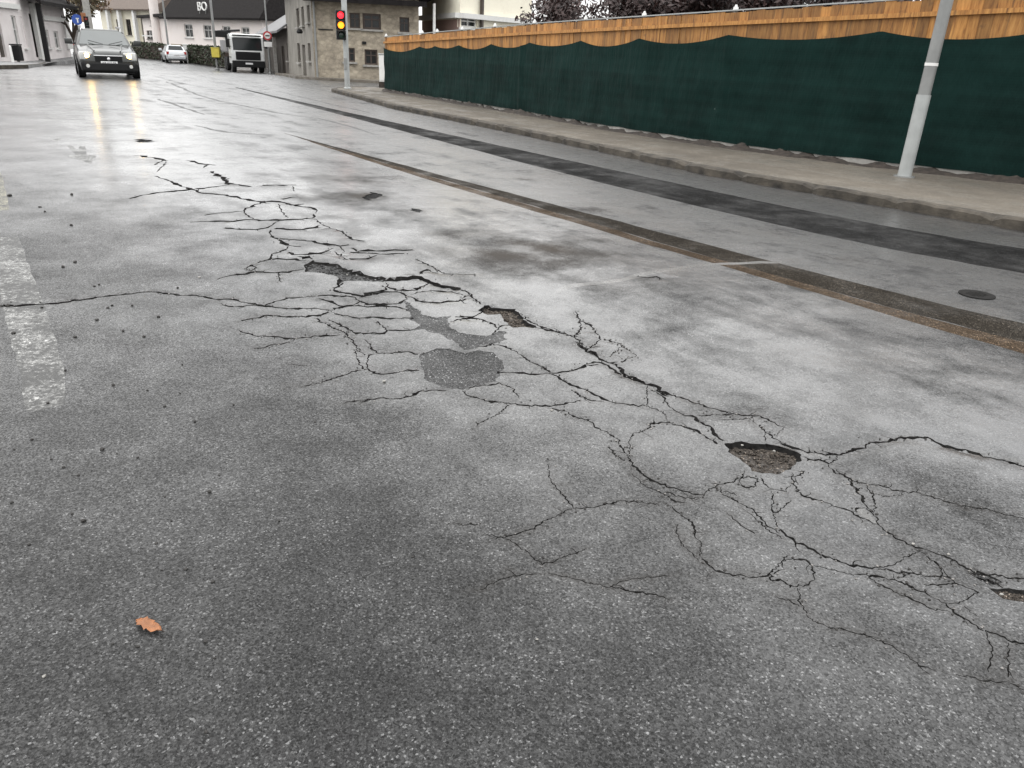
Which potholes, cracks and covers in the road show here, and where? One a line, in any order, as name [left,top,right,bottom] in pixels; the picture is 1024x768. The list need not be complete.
pothole [478,305,536,328]
manhole cover [958,289,996,300]
crack [0,156,1024,690]
pothole [725,441,802,474]
pothole [989,588,1024,602]
pothole [304,260,386,285]
